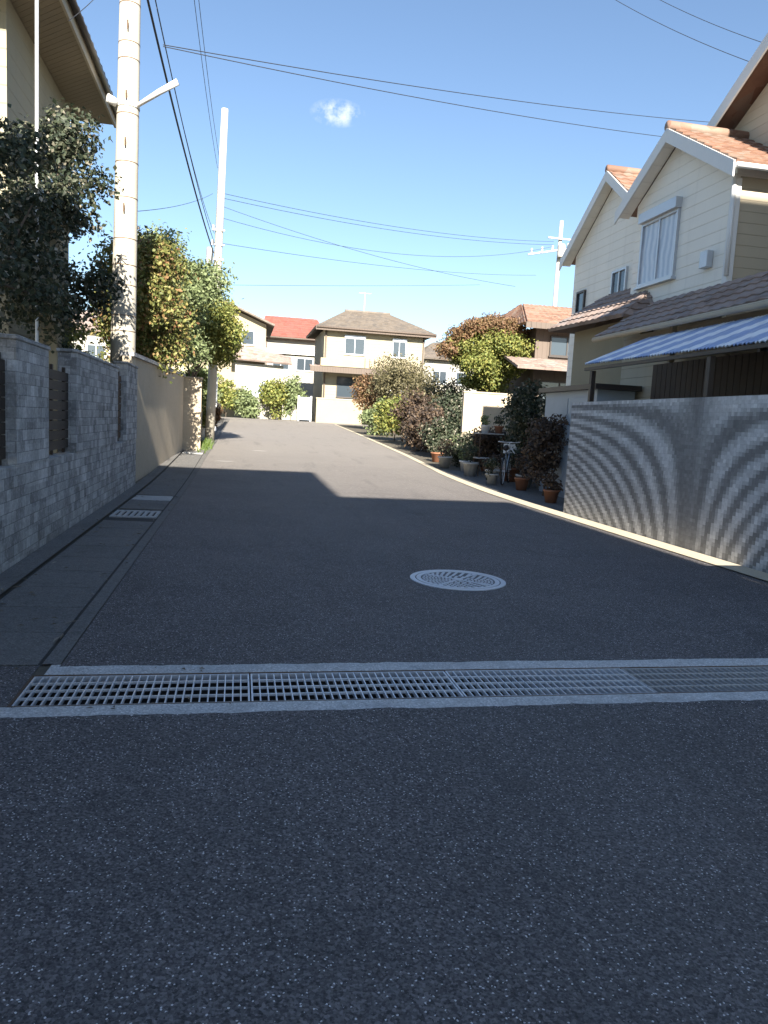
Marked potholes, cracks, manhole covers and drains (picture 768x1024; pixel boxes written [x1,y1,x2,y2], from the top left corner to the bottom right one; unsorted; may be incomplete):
manhole cover [410,570,506,591]
drain grate [250,671,464,701]
drain grate [12,674,250,706]
drain grate [445,668,656,697]
drain grate [621,666,768,693]
